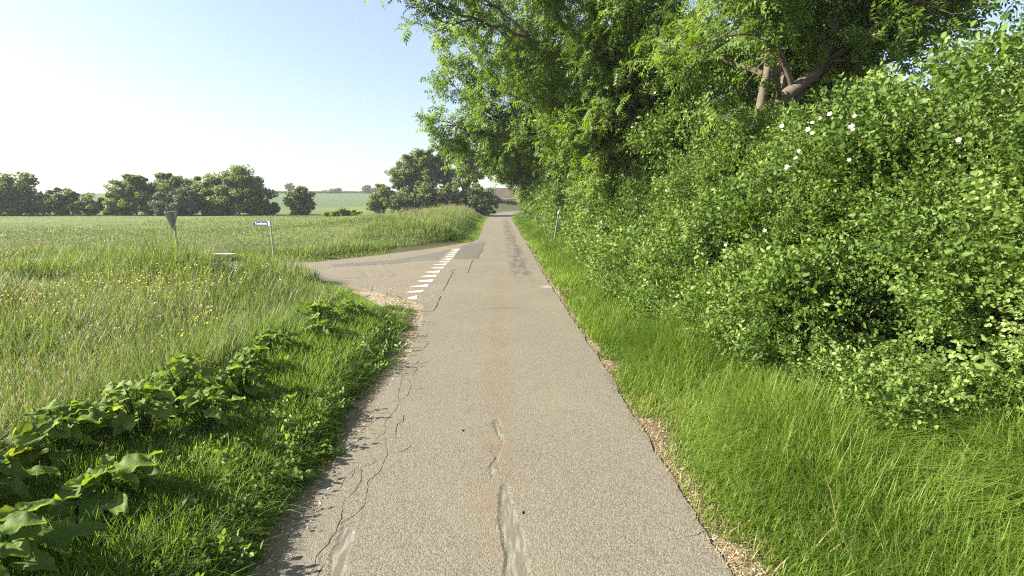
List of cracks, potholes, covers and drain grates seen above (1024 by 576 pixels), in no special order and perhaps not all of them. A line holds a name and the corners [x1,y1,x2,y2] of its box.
crack [309,334,429,575]
